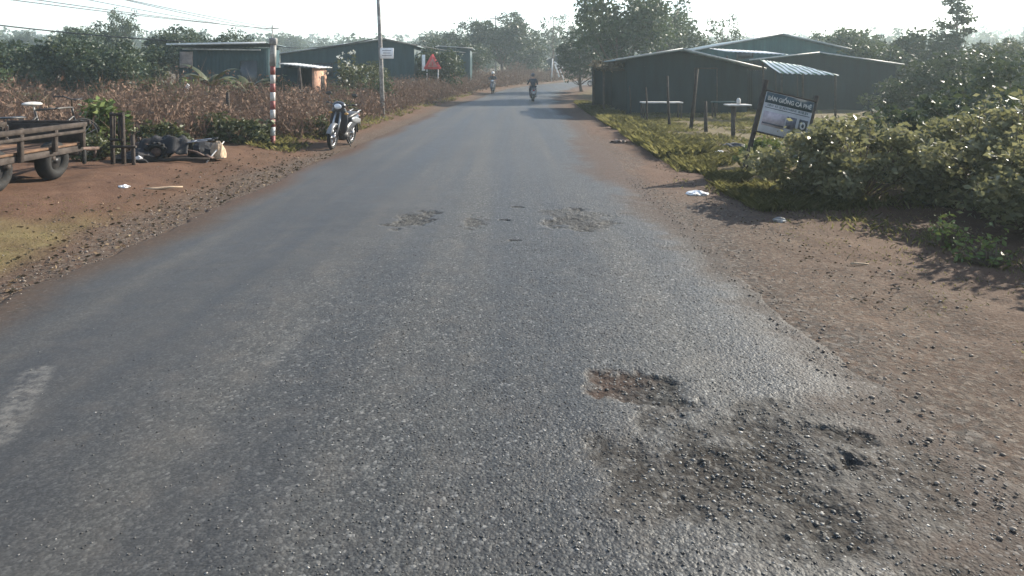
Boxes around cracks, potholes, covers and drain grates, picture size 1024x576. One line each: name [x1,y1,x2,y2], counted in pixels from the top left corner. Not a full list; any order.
pothole [529,378,1013,576]
pothole [581,367,706,423]
pothole [527,203,626,233]
pothole [455,214,490,231]
pothole [375,207,443,231]
